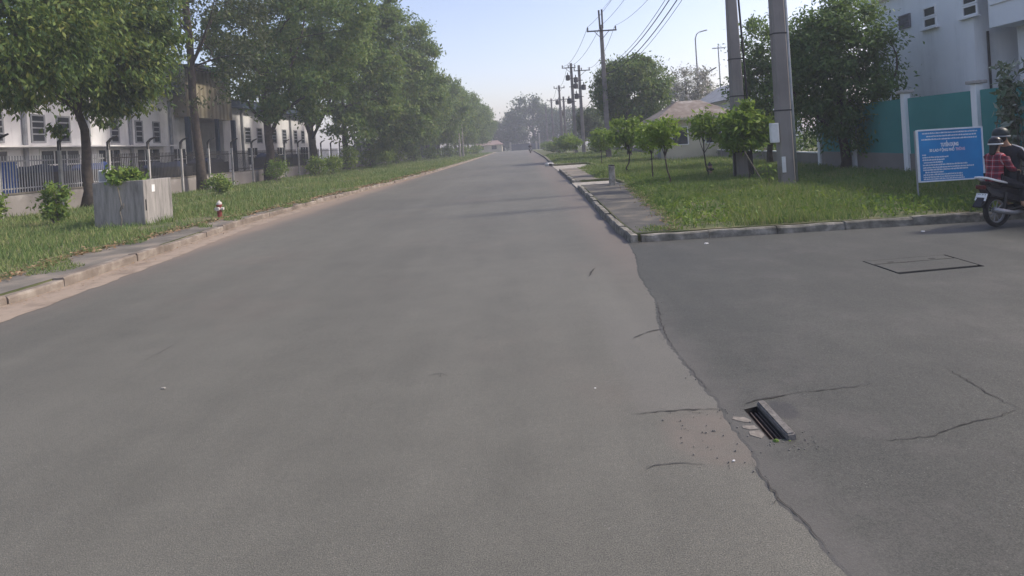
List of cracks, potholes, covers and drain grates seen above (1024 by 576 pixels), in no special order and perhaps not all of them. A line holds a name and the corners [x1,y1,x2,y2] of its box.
crack [747,383,874,403]
crack [874,371,1018,441]
manhole cover [862,255,983,274]
drain grate [732,400,796,443]
crack [634,302,723,414]
